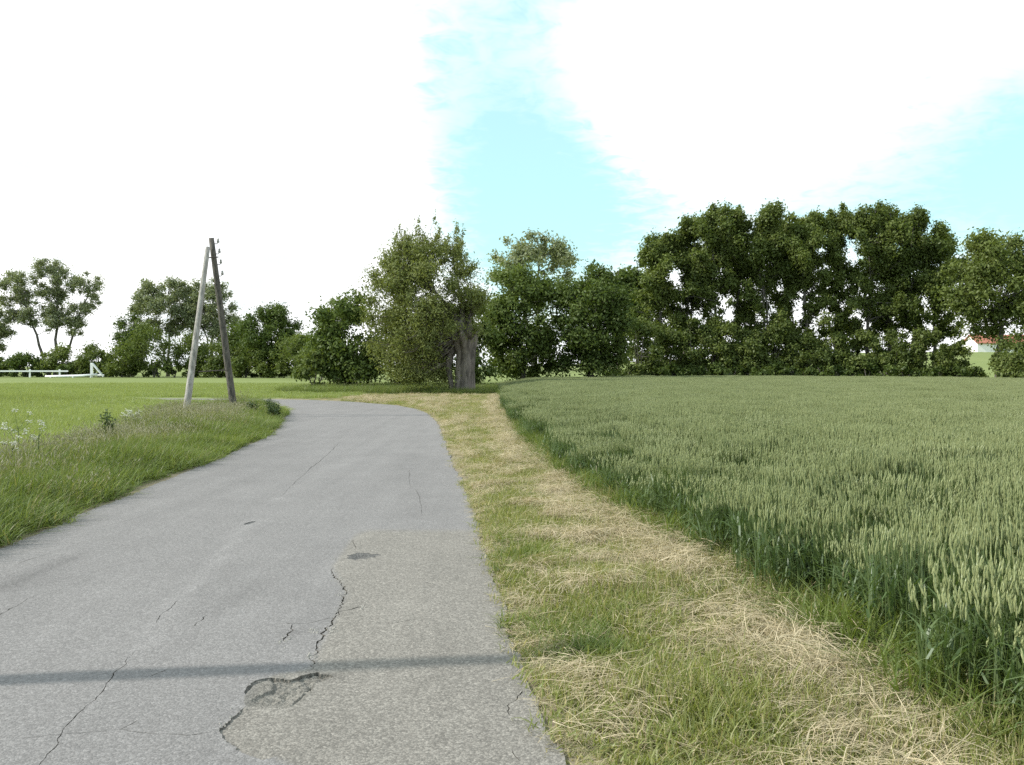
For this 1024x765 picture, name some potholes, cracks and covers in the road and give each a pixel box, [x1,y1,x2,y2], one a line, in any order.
pothole [243,672,333,709]
crack [283,569,358,670]
crack [25,651,208,765]
